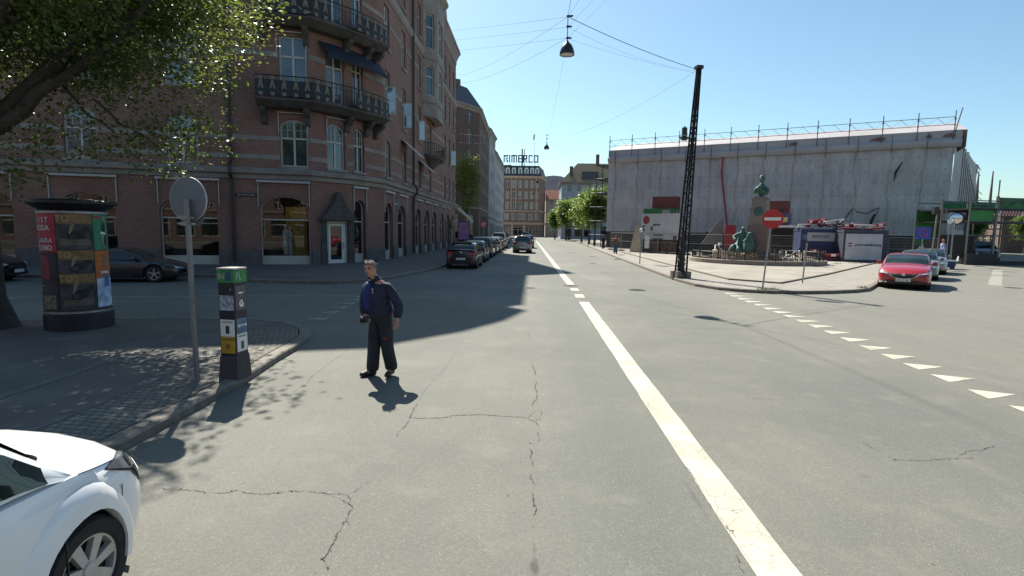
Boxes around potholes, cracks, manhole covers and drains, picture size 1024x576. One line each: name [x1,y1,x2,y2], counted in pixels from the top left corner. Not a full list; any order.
crack [163,488,358,573]
crack [397,354,542,551]
